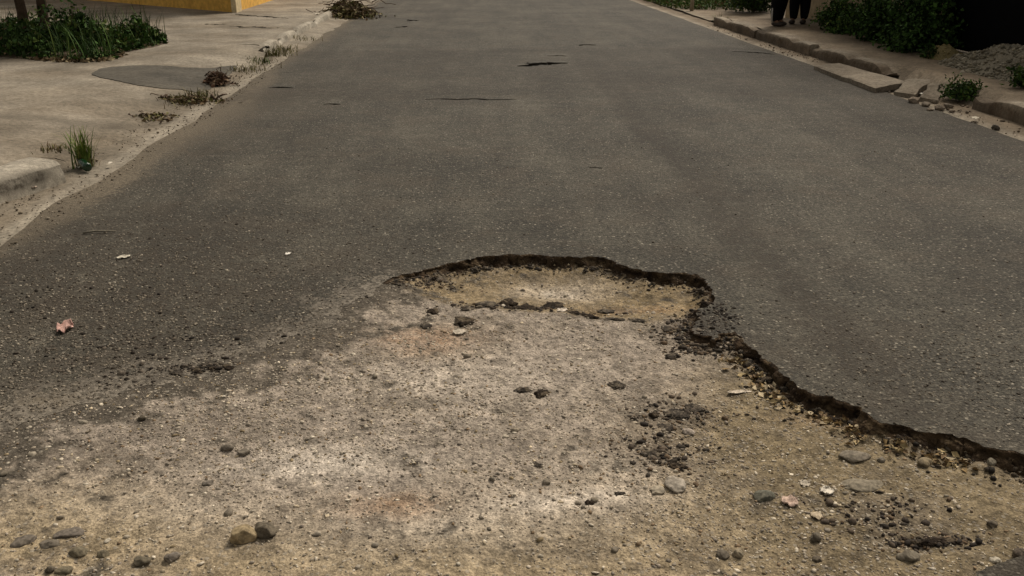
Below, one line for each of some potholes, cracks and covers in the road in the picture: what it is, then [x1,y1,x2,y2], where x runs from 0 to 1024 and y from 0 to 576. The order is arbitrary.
pothole [0,284,1024,576]
pothole [382,254,715,323]
crack [517,43,596,66]
